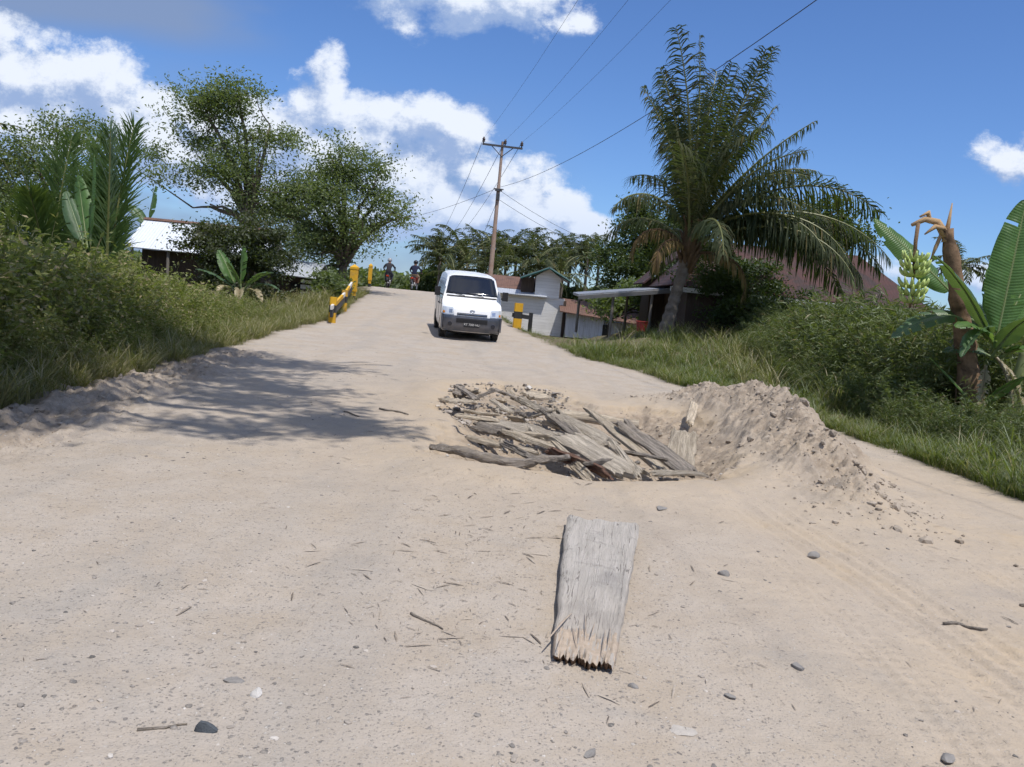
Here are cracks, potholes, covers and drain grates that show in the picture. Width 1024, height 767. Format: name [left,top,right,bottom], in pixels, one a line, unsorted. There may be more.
pothole [423,385,747,482]
